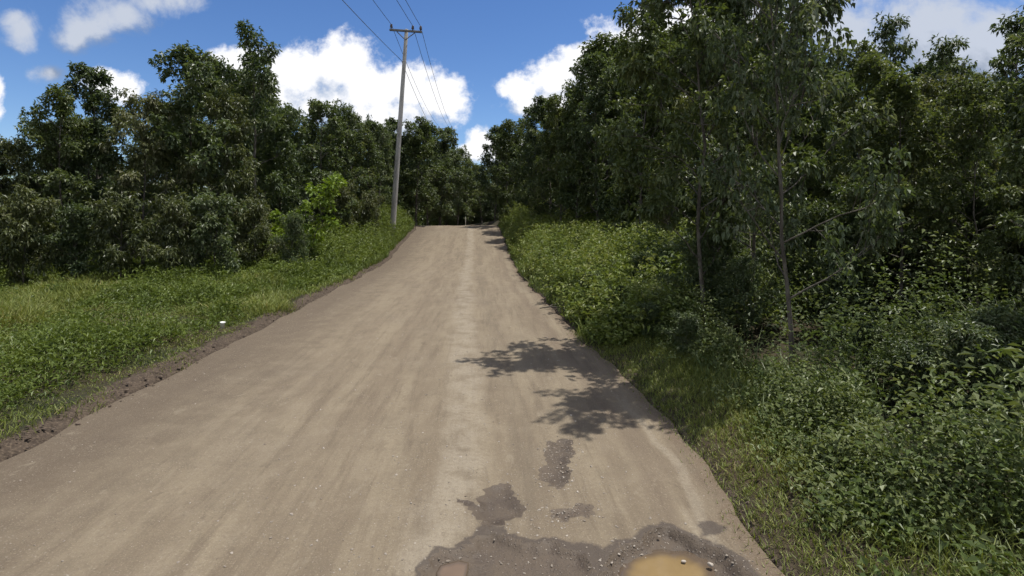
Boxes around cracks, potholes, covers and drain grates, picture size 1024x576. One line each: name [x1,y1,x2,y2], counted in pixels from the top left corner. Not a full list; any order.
pothole [538,438,576,489]
pothole [417,533,598,576]
pothole [457,483,527,529]
pothole [597,525,754,576]
pothole [549,503,596,523]
